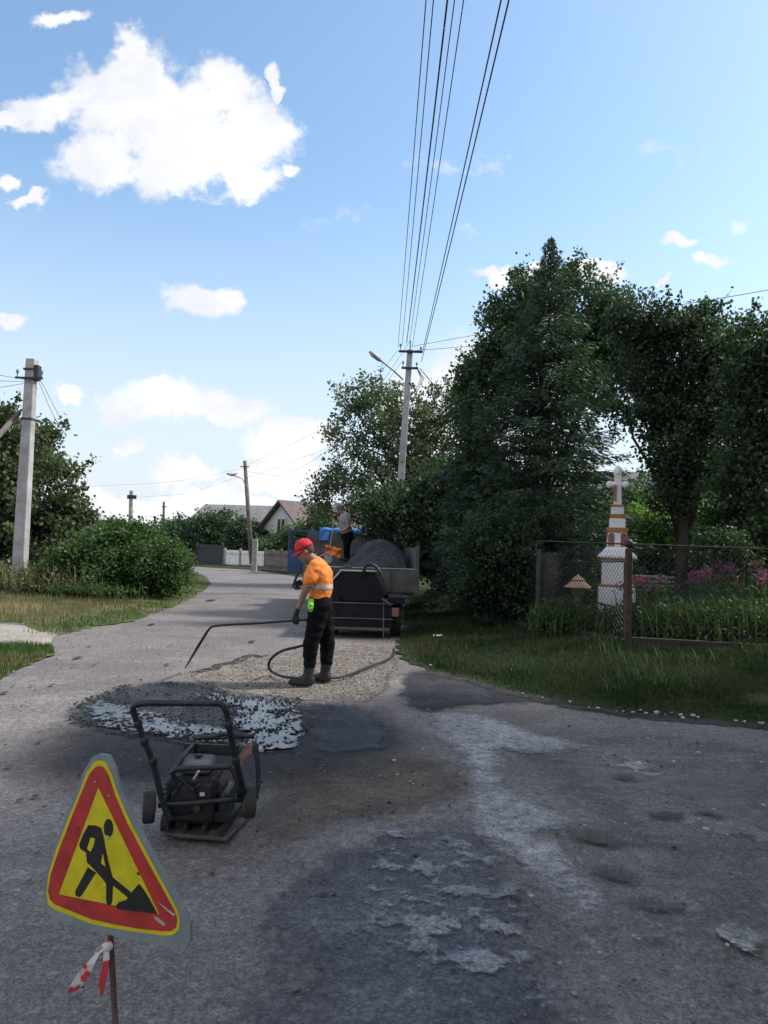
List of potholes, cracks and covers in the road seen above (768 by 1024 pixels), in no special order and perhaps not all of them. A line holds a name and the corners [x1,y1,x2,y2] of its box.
pothole [628,898,682,911]
pothole [591,864,636,881]
pothole [648,810,682,818]
pothole [70,683,306,753]
pothole [572,829,622,847]
